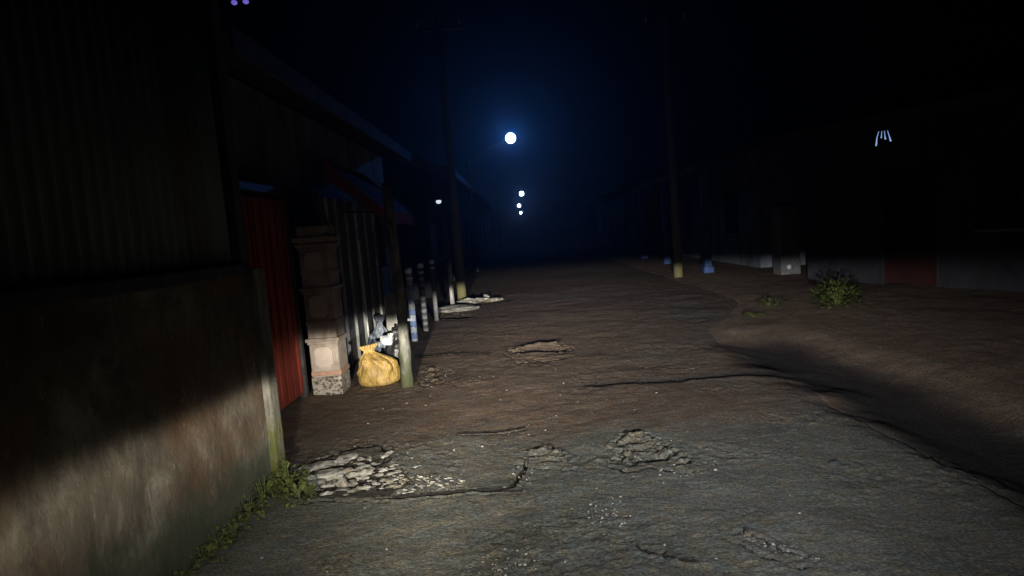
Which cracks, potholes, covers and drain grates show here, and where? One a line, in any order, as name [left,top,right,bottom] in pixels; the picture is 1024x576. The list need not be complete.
pothole [512,445,580,471]
pothole [502,341,576,364]
crack [626,541,709,569]
pothole [602,429,711,474]
pothole [280,443,419,505]
pothole [416,367,447,386]
crack [454,425,530,435]
crack [369,459,533,503]
